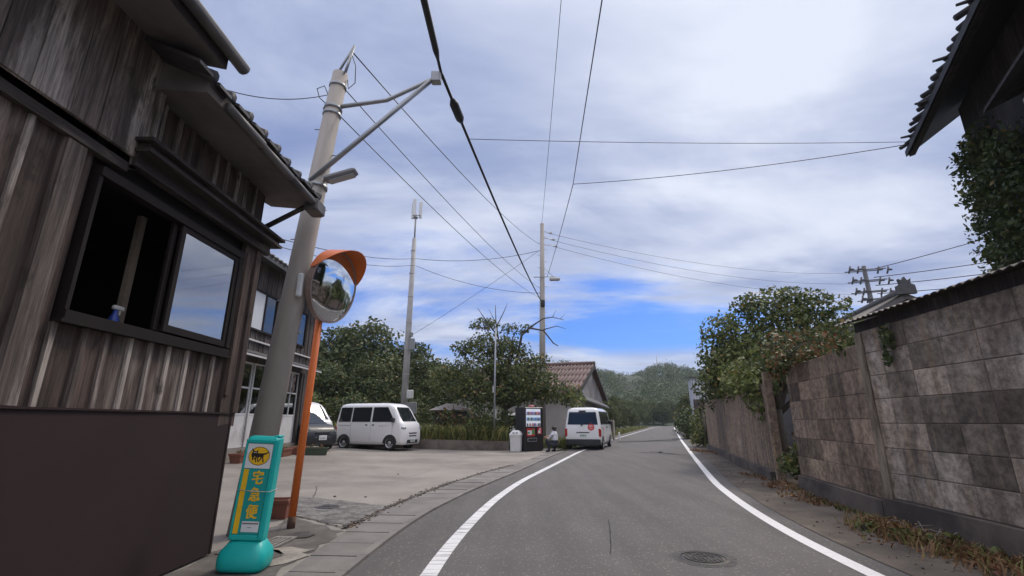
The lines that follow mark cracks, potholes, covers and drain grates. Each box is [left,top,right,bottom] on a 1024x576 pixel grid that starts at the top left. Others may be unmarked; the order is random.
drain grate [269,536,297,549]
manhole cover [678,551,730,565]
